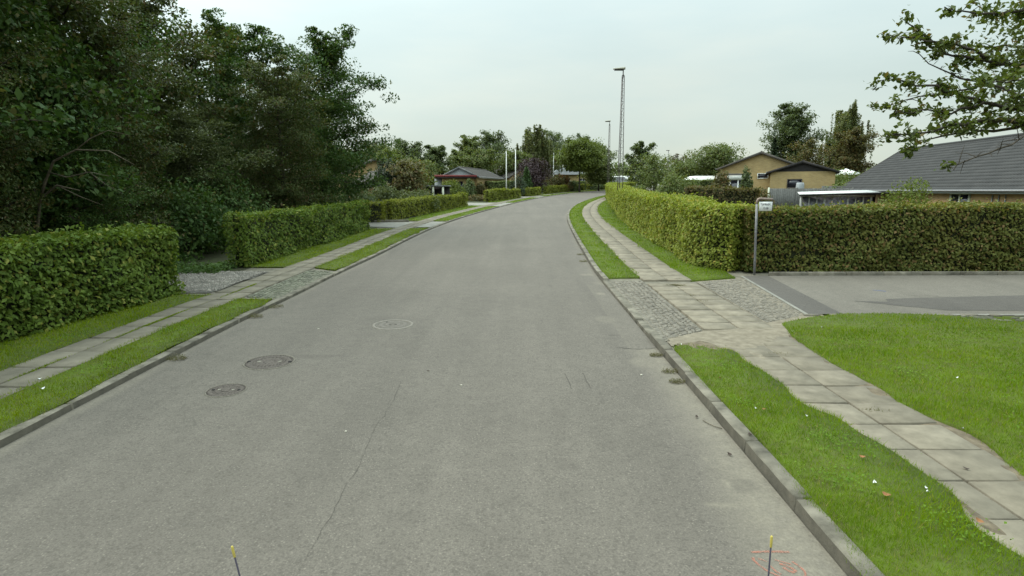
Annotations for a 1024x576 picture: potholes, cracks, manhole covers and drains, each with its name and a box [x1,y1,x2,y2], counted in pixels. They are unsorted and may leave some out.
crack [299,384,400,570]
manhole cover [372,320,413,330]
manhole cover [204,383,247,398]
manhole cover [242,354,296,370]
